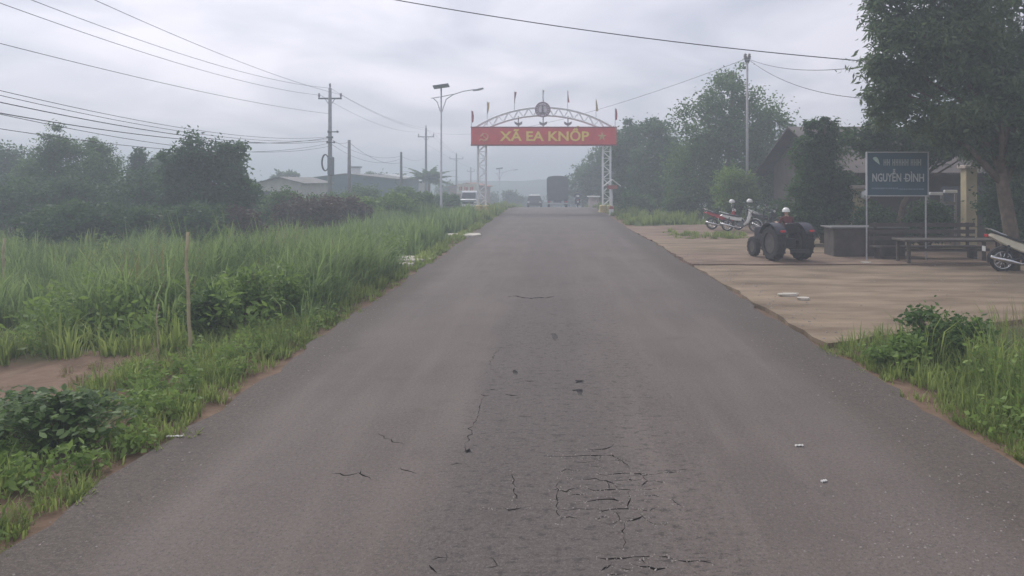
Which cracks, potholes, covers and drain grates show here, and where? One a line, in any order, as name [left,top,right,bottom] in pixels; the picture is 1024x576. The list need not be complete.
crack [452,334,625,465]
crack [600,556,710,575]
crack [548,444,679,548]
